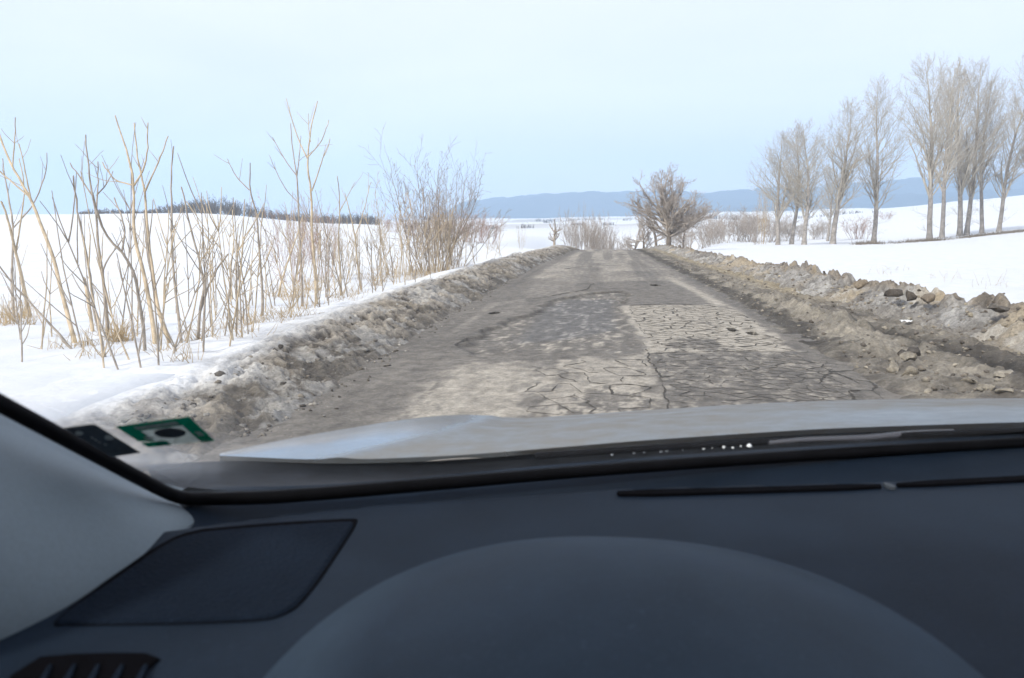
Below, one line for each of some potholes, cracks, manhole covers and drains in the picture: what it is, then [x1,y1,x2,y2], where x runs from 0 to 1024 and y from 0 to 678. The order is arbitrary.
crack [525,265,880,414]
pothole [443,291,659,357]
